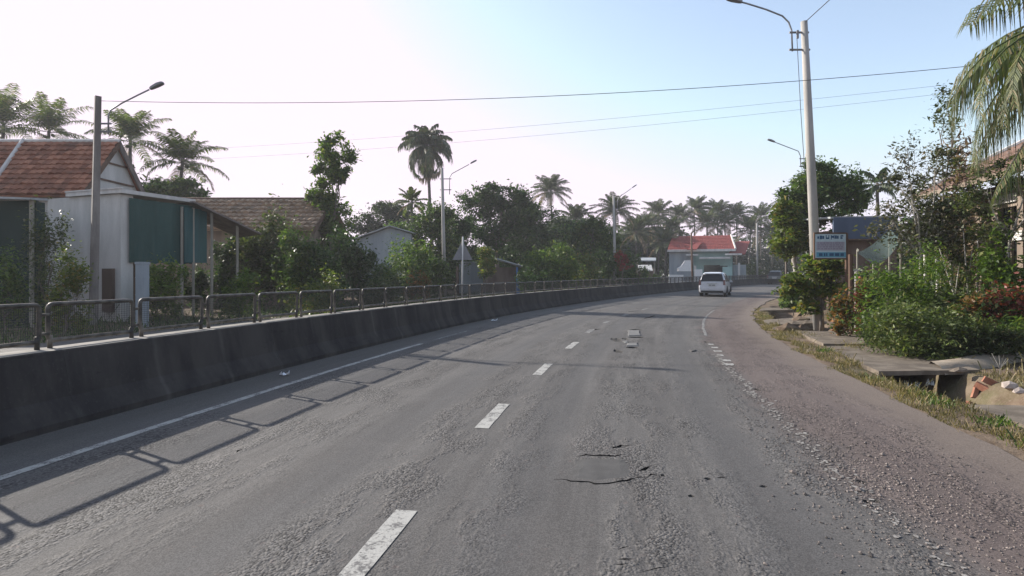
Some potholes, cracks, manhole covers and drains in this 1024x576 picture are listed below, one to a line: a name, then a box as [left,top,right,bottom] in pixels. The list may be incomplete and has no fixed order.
crack [554,444,654,485]
